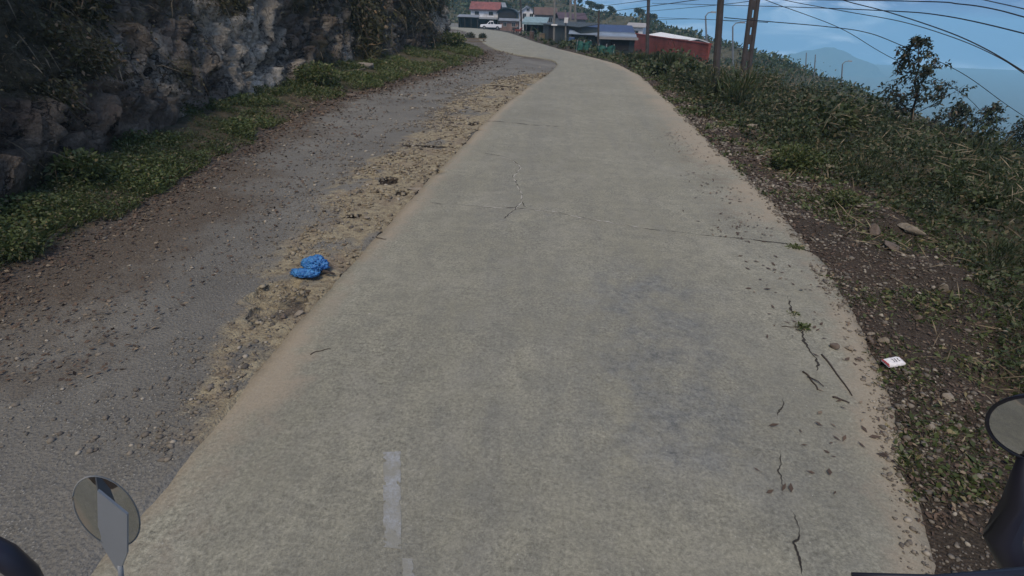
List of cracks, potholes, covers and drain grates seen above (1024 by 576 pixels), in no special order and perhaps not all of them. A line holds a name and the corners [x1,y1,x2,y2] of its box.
crack [787,296,820,373]
crack [777,399,802,574]
crack [340,61,812,277]
